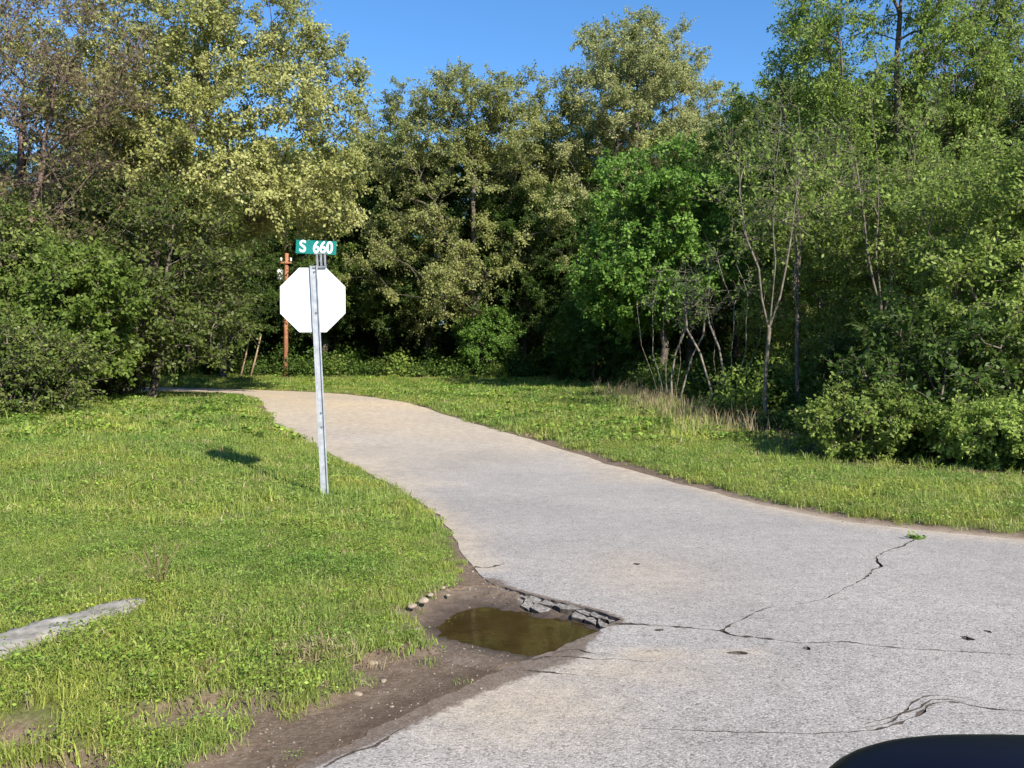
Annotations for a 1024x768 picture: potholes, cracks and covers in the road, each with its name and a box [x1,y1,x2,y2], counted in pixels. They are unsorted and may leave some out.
pothole [397,587,615,670]
crack [801,539,915,604]
crack [645,695,1017,734]
crack [615,607,1022,655]
